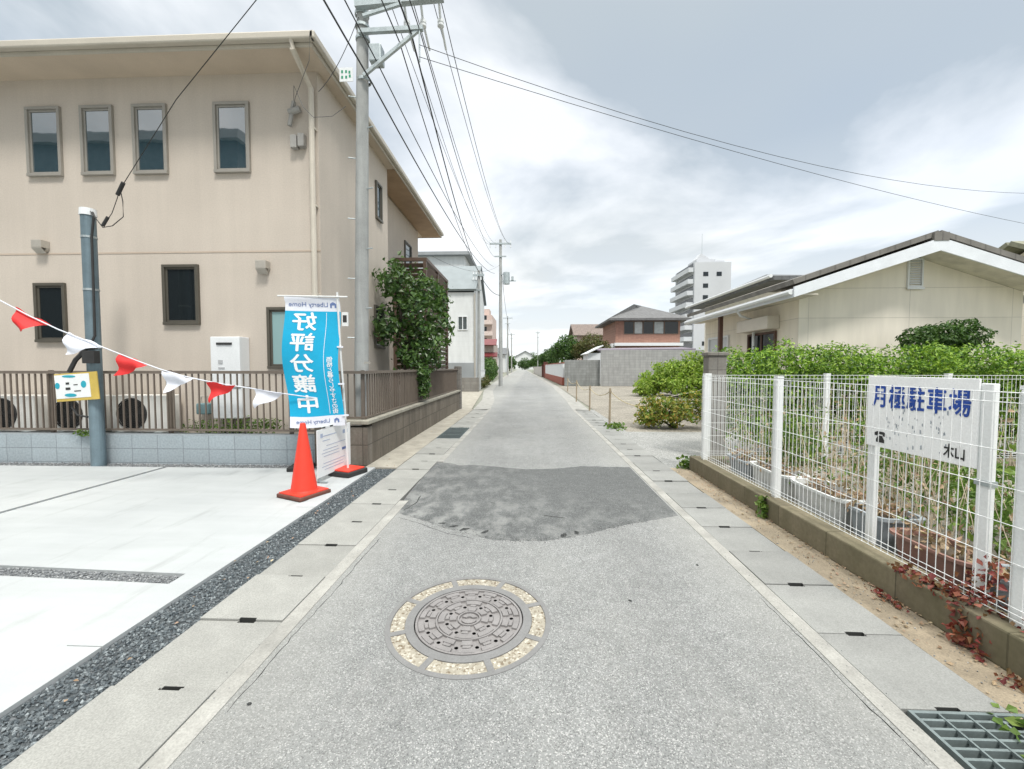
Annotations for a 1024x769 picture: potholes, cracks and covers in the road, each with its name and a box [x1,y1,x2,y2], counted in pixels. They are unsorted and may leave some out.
drain grate [907,710,1024,769]
drain grate [437,427,469,439]
manhole cover [384,577,551,680]
